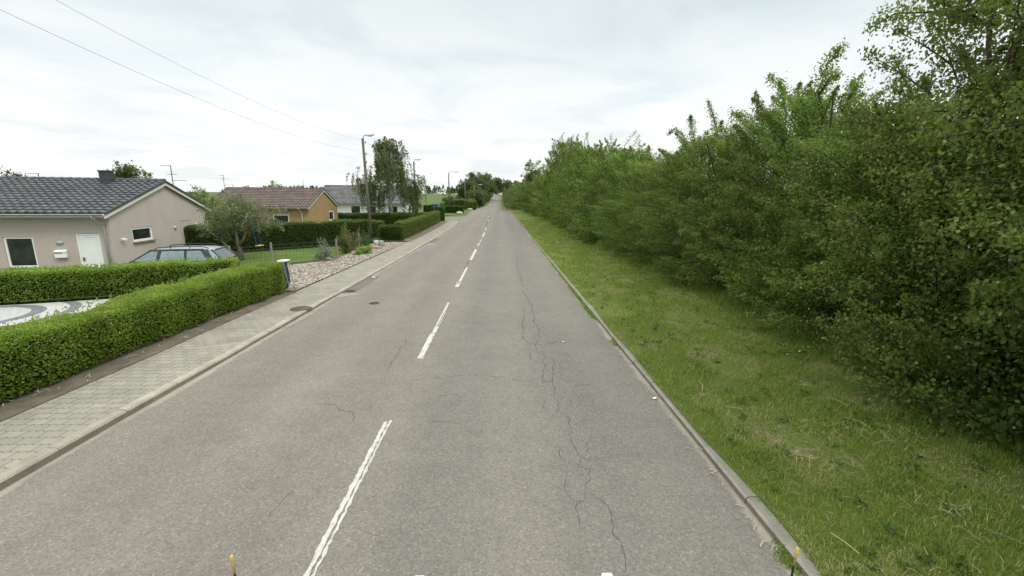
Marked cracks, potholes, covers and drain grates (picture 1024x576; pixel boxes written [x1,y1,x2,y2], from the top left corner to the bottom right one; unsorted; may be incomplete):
crack [516,255,626,574]
